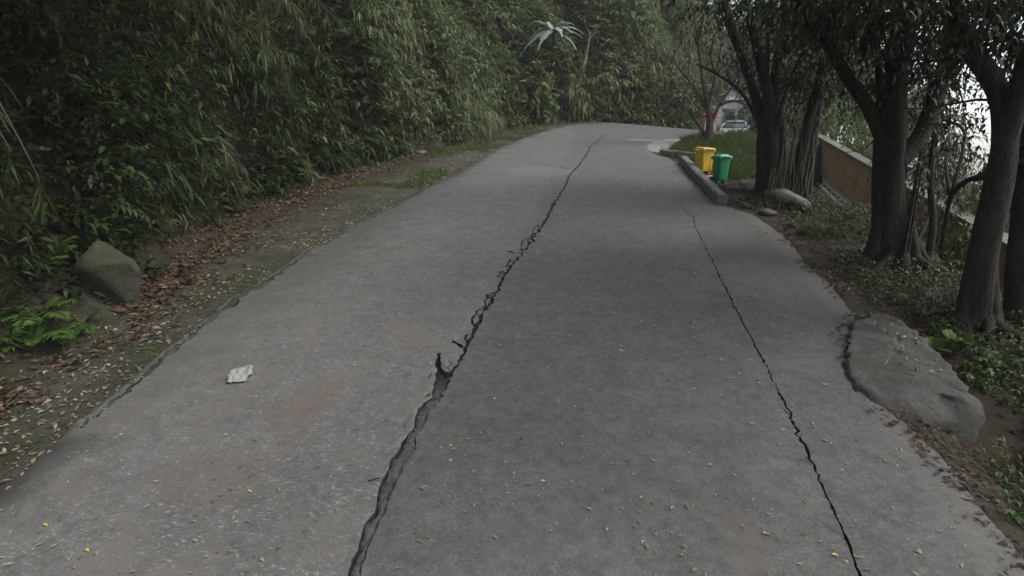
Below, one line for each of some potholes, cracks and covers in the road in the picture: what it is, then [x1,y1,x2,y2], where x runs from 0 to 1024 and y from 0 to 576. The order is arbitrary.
crack [348,134,606,576]
crack [683,208,862,576]
